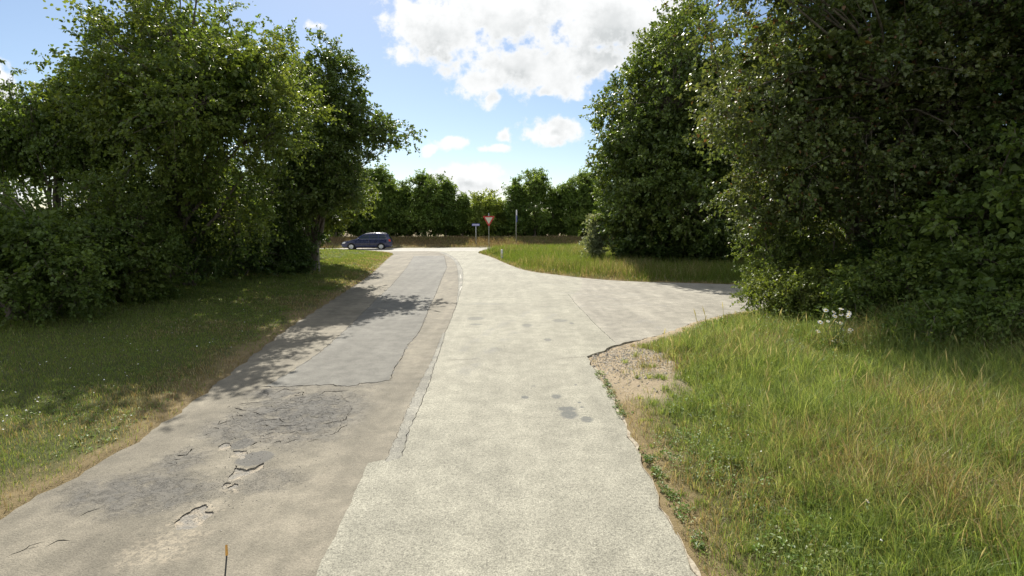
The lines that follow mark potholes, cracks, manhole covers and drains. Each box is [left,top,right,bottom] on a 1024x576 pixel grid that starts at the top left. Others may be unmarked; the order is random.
pothole [227,463,264,481]
pothole [174,504,214,530]
crack [206,253,459,461]
